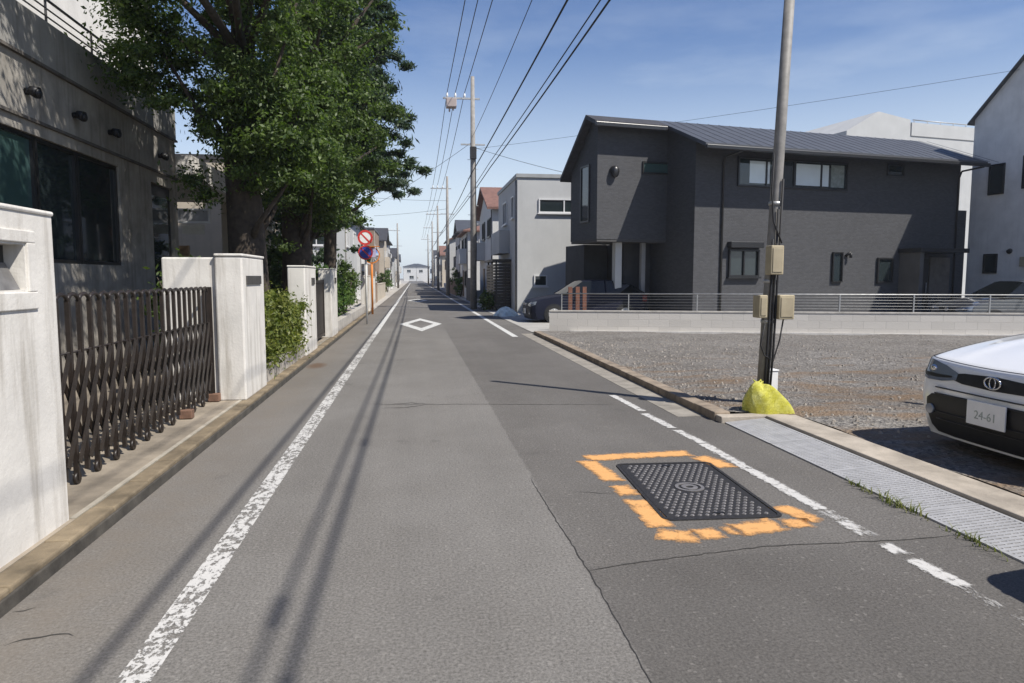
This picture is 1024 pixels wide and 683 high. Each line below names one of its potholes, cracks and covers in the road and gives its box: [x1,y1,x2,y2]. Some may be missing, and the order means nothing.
drain grate [771,439,883,474]
crack [9,633,74,644]
crack [589,536,942,571]
drain grate [832,466,980,515]
drain grate [725,418,815,445]
drain grate [919,505,1024,564]
manhole cover [616,462,782,521]
